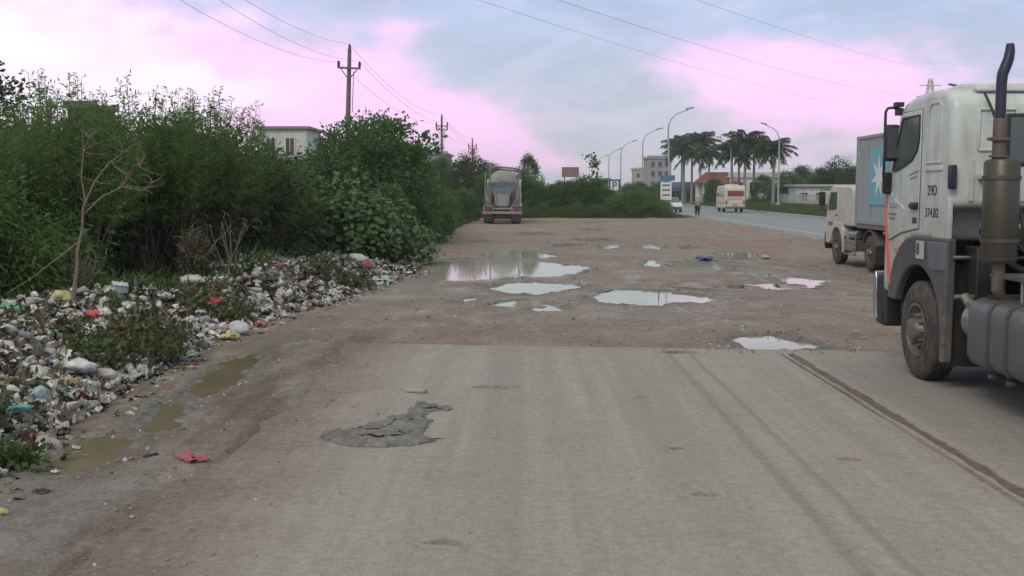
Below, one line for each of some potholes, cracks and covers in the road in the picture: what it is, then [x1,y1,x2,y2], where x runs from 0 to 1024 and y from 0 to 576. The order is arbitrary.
pothole [694,329,857,351]
pothole [558,286,748,310]
pothole [405,258,611,283]
pothole [465,280,609,297]
pothole [472,250,565,260]
pothole [763,276,834,289]
pothole [743,282,807,290]
